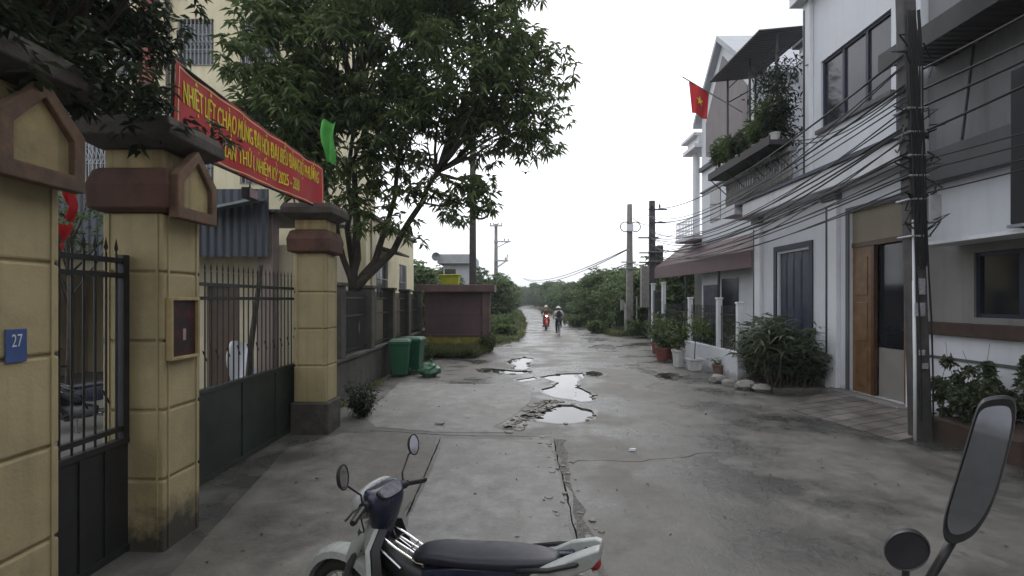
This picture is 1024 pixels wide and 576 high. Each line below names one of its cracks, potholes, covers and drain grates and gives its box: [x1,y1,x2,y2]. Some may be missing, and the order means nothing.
pothole [530,403,598,425]
pothole [504,356,535,370]
pothole [651,372,688,380]
crack [498,399,721,572]
pothole [538,372,598,402]
